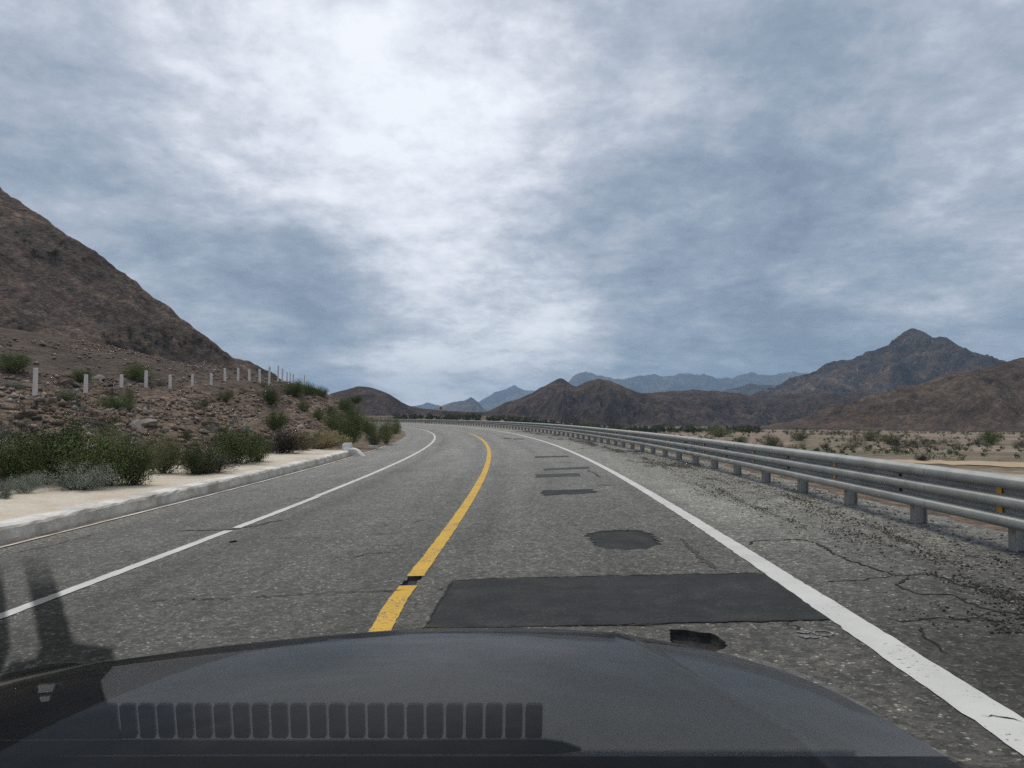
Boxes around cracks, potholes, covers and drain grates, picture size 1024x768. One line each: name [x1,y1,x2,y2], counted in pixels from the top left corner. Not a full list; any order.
crack [680,538,716,569]
crack [180,520,299,538]
pothole [399,576,422,586]
crack [750,538,1019,654]
pothole [669,629,728,651]
